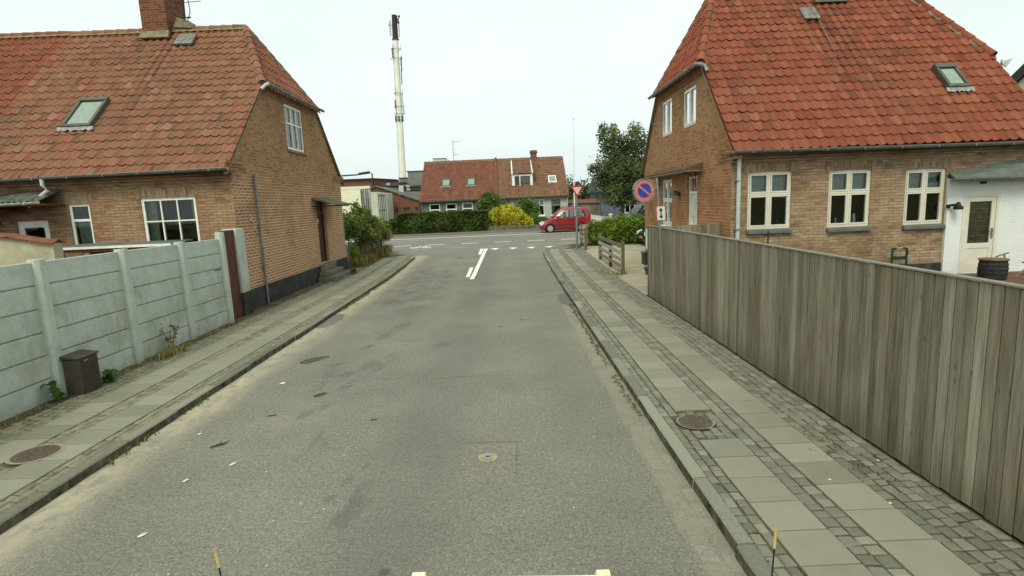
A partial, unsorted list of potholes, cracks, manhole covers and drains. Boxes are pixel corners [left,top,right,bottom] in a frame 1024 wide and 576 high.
manhole cover [4,443,65,465]
manhole cover [478,453,497,462]
manhole cover [676,415,715,429]
